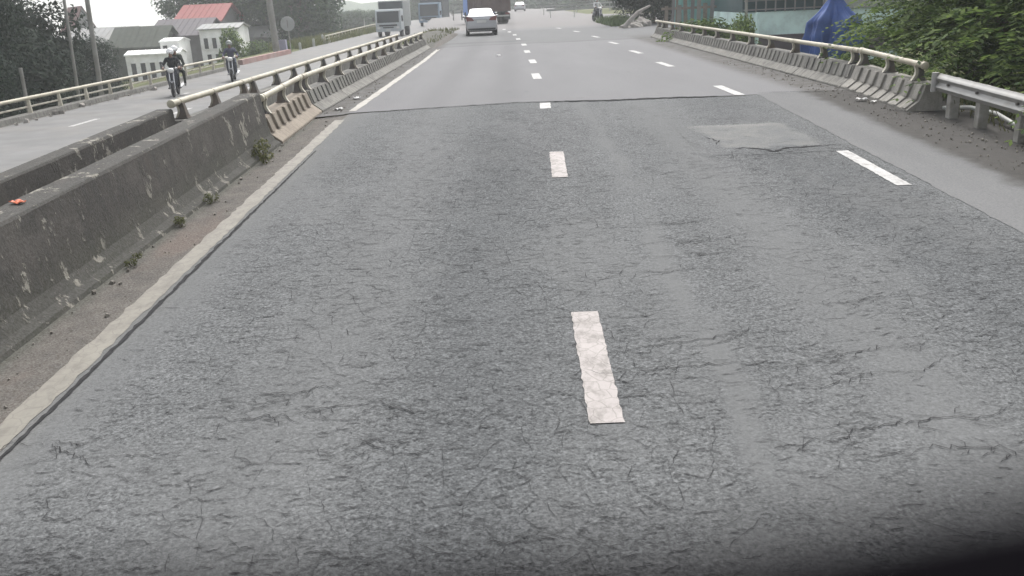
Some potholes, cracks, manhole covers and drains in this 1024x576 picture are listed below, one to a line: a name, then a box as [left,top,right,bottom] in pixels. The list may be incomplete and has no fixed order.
crack [739,144,833,152]
